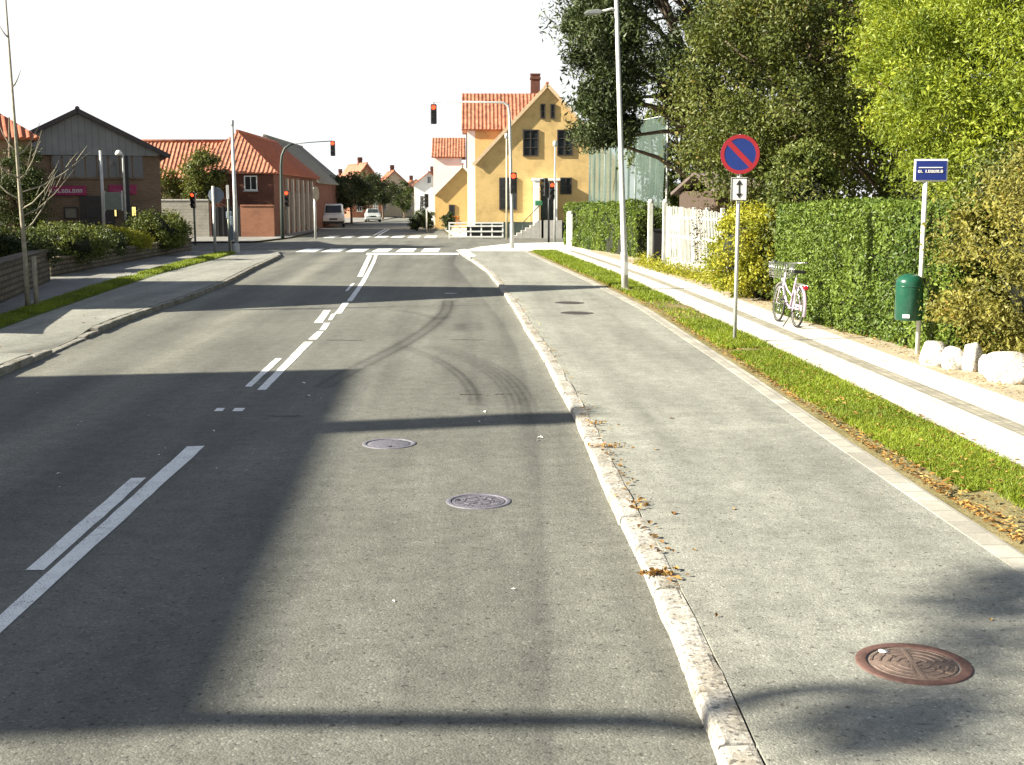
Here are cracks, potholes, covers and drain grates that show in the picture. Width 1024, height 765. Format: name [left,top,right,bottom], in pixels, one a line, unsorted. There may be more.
manhole cover [855,643,974,686]
manhole cover [362,438,416,449]
manhole cover [446,493,511,509]
